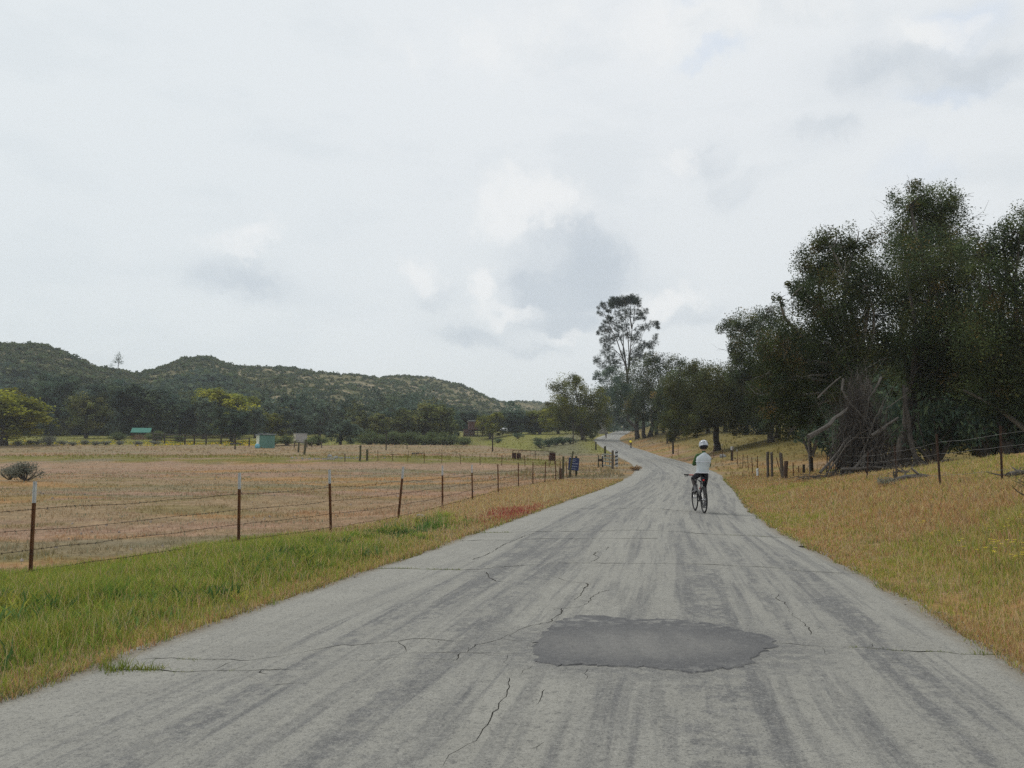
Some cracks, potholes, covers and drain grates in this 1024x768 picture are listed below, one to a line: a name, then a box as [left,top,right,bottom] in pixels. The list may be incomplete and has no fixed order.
crack [119,530,841,765]
crack [776,594,988,655]
